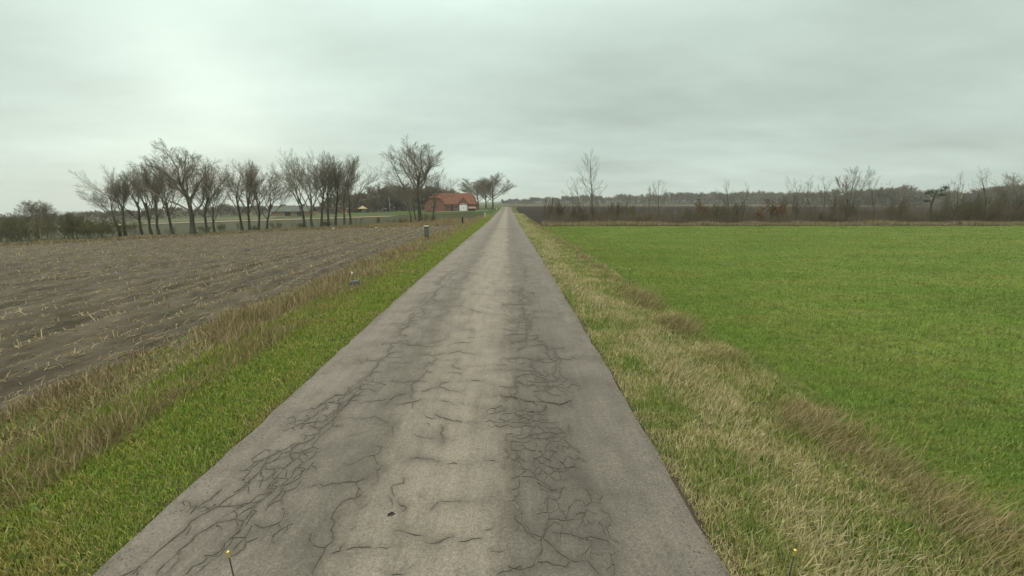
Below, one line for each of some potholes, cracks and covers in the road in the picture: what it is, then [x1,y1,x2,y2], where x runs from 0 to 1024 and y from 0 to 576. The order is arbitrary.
crack [122,266,618,576]
